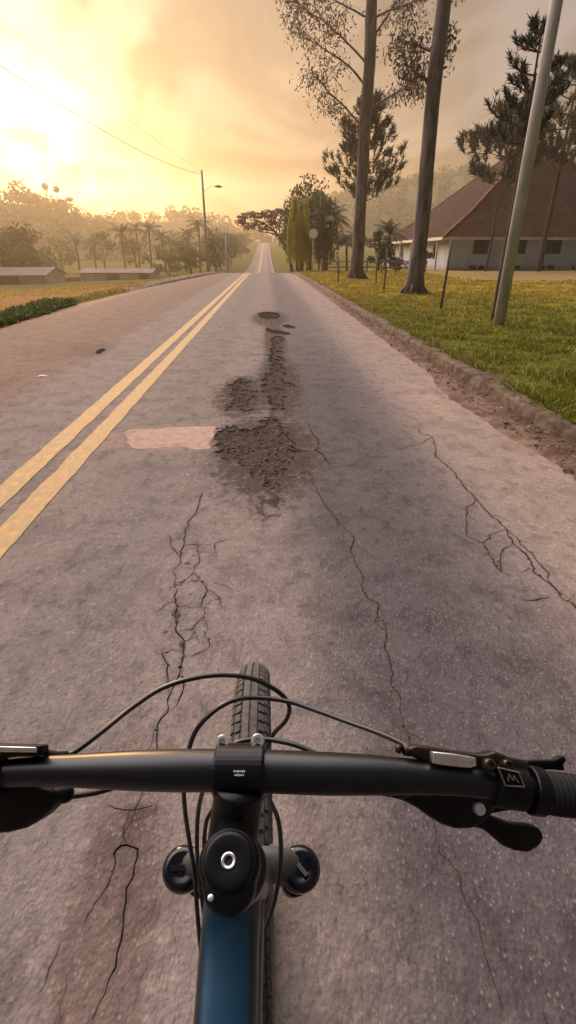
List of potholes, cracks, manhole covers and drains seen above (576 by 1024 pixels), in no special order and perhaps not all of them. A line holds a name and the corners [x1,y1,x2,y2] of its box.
crack [292,423,502,1007]
pothole [222,378,259,412]
crack [40,495,227,1019]
pothole [260,336,296,411]
pothole [213,417,300,489]
pothole [258,312,281,320]
crack [402,427,576,619]
